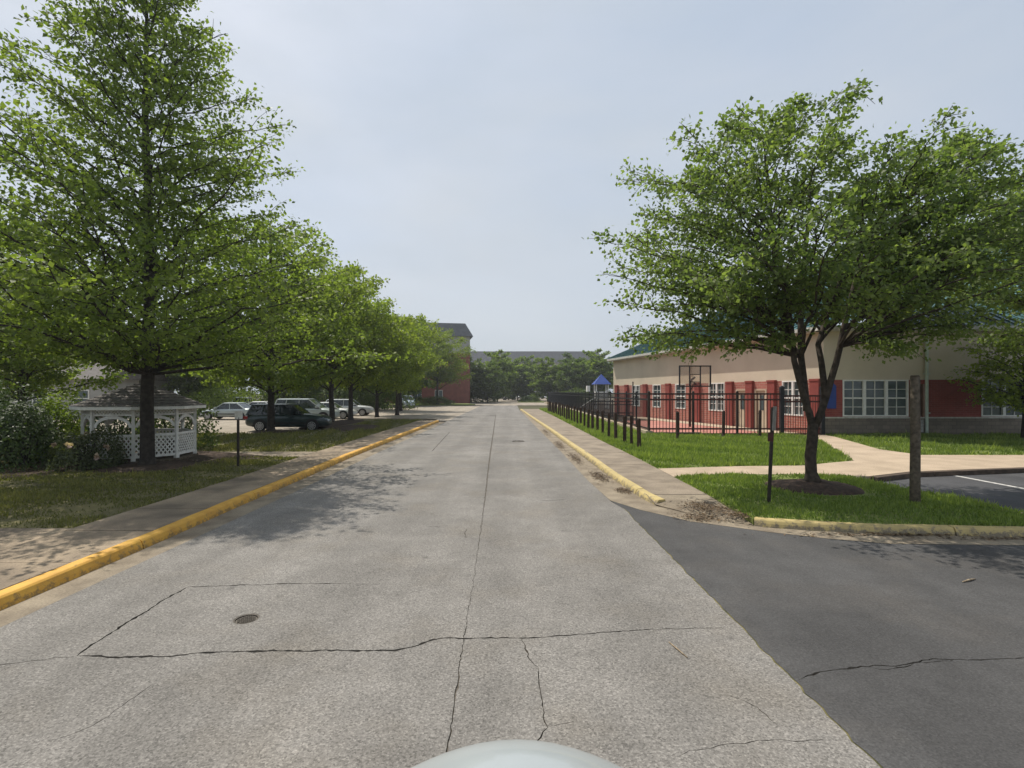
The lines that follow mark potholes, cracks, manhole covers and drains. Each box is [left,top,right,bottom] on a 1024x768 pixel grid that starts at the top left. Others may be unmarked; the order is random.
crack [799,658,1021,680]
manhole cover [233,614,260,624]
crack [1,583,692,741]
crack [677,695,823,757]
